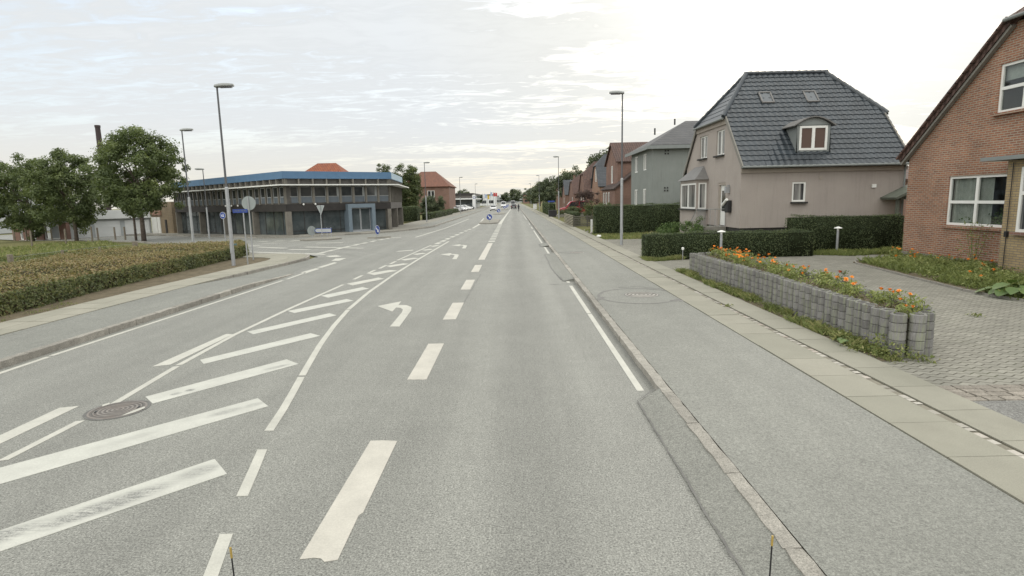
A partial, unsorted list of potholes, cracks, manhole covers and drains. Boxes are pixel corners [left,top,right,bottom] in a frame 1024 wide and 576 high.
manhole cover [82,400,151,420]
